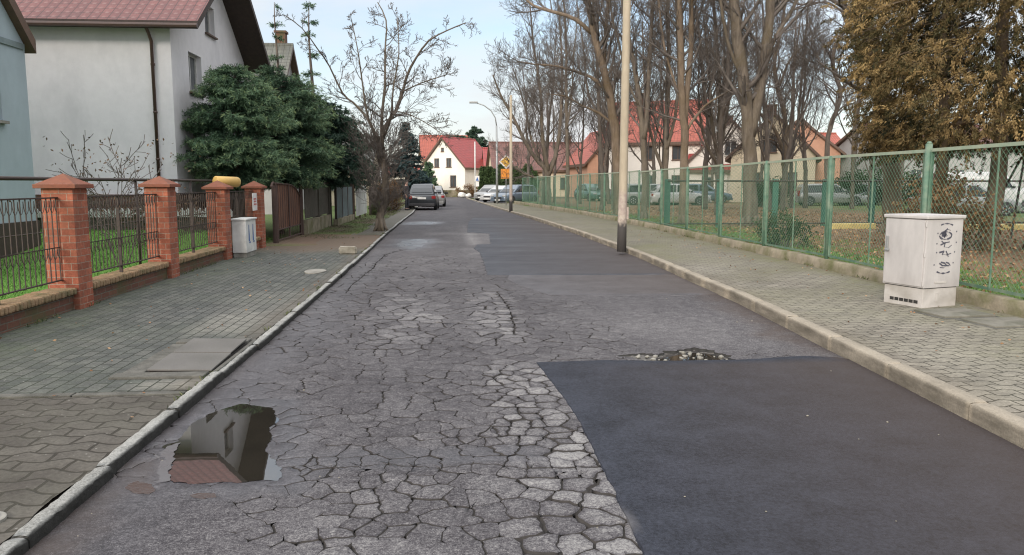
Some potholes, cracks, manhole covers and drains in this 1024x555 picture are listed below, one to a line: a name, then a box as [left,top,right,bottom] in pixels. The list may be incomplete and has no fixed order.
crack [116,250,788,555]
manhole cover [108,338,258,380]
pothole [618,347,735,361]
